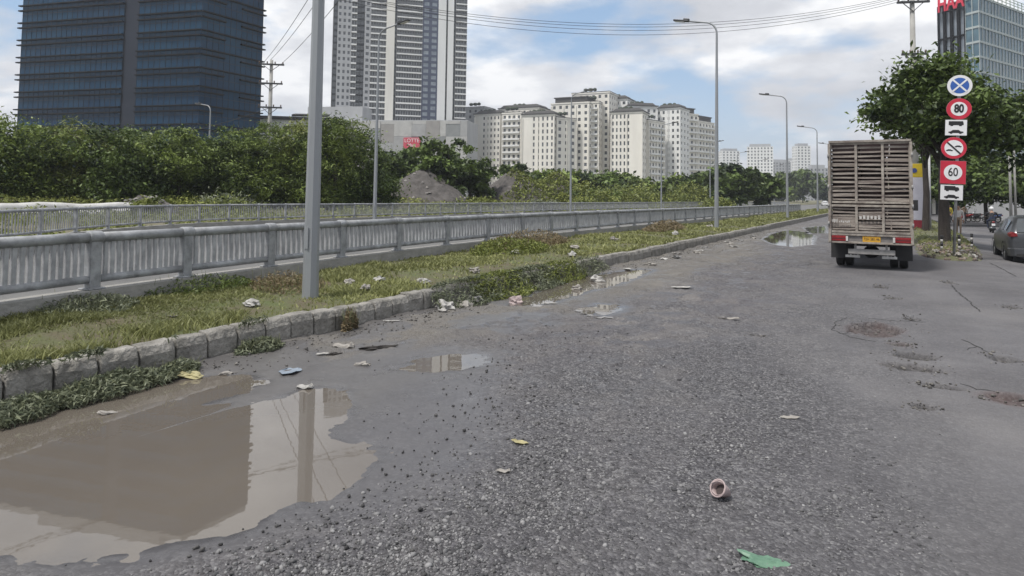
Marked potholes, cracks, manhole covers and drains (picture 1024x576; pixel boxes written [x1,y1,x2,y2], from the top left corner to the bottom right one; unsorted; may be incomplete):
pothole [915,382,976,393]
pothole [842,322,909,338]
pothole [974,391,1024,408]
pothole [394,351,496,373]
pothole [575,302,630,318]
pothole [905,402,945,413]
pothole [0,371,398,572]
pothole [869,361,960,375]
pothole [760,230,819,247]
pothole [888,351,945,362]
